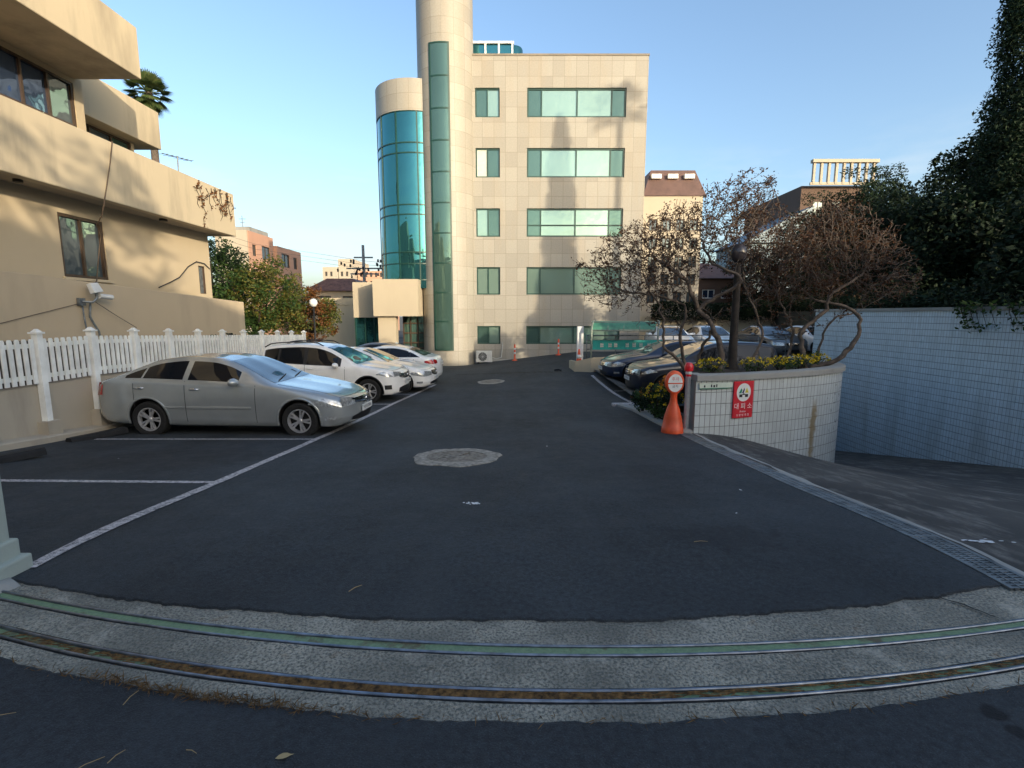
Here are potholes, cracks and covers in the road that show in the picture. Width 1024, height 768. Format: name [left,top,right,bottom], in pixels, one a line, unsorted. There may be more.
manhole cover [413,448,502,467]
drain grate [680,433,1024,591]
